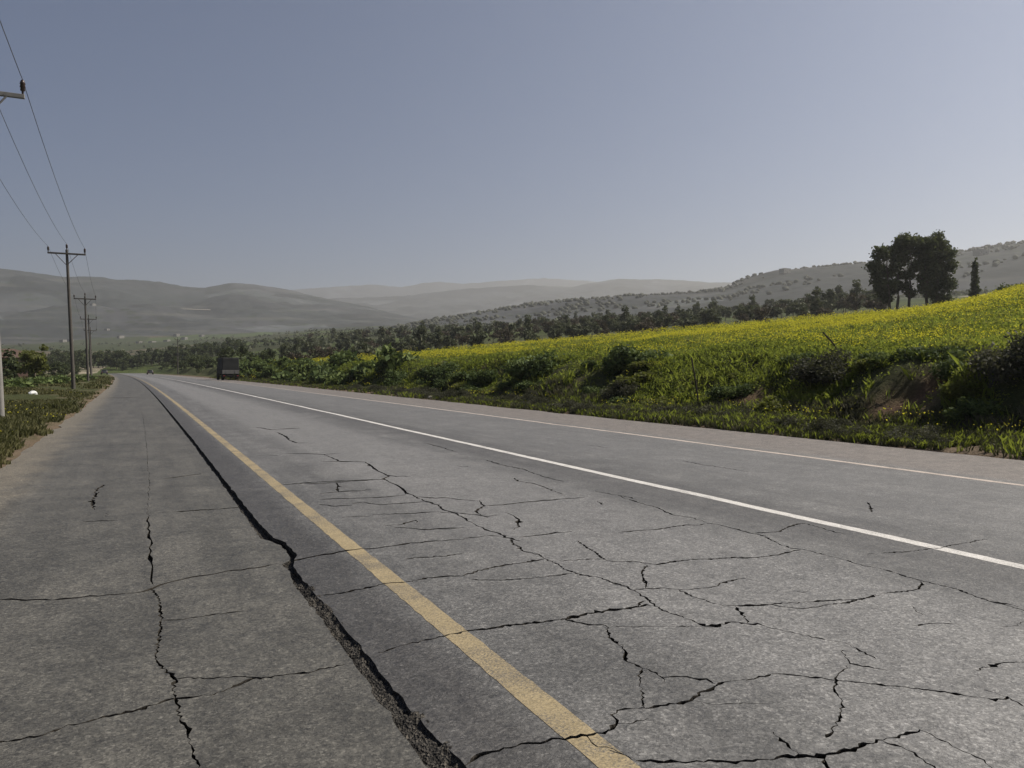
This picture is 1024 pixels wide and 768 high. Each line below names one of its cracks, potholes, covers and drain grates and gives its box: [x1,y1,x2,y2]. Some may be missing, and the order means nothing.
crack [0,383,1024,768]
